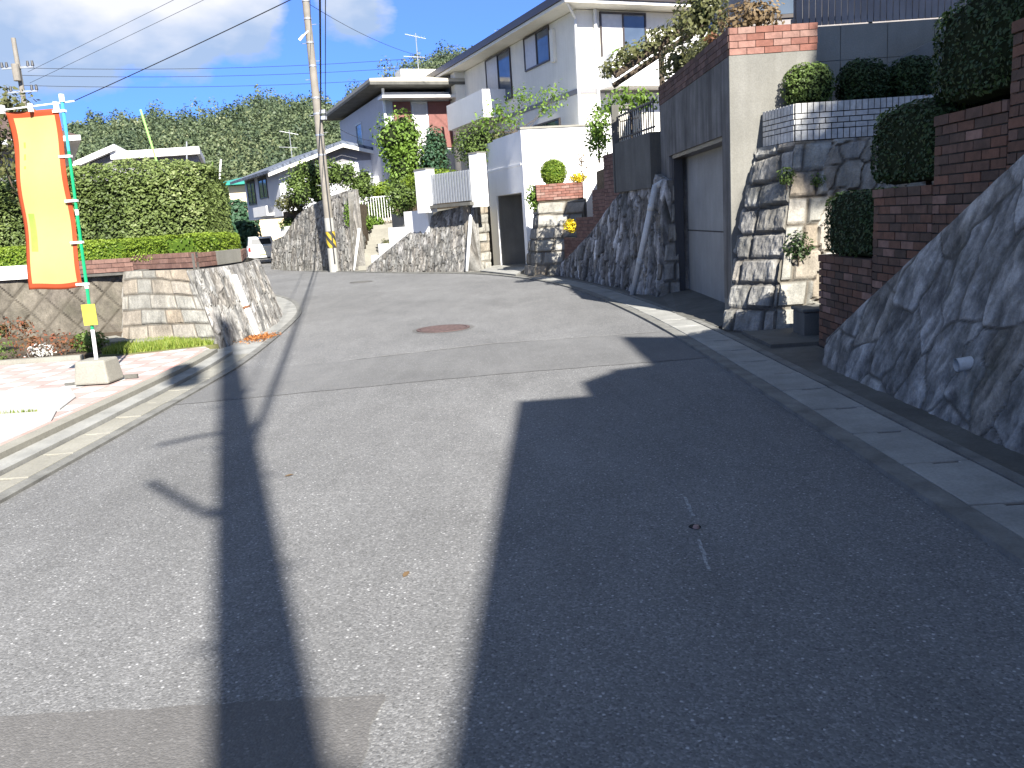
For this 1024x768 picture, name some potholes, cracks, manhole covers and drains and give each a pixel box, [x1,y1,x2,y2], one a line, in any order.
manhole cover [416,324,470,333]
